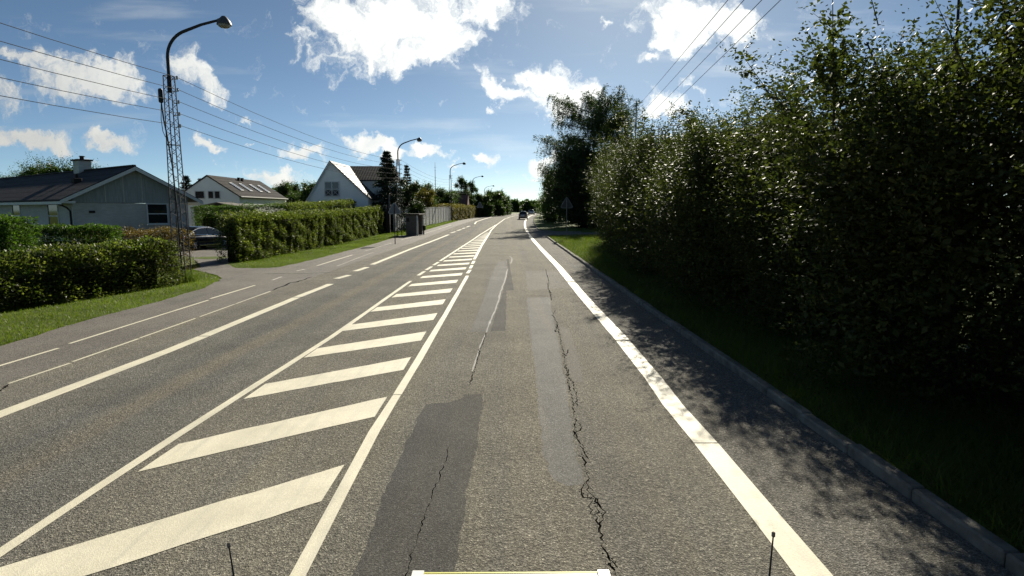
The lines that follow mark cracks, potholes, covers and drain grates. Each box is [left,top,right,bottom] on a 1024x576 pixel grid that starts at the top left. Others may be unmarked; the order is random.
crack [405,450,448,576]
crack [552,310,618,575]
